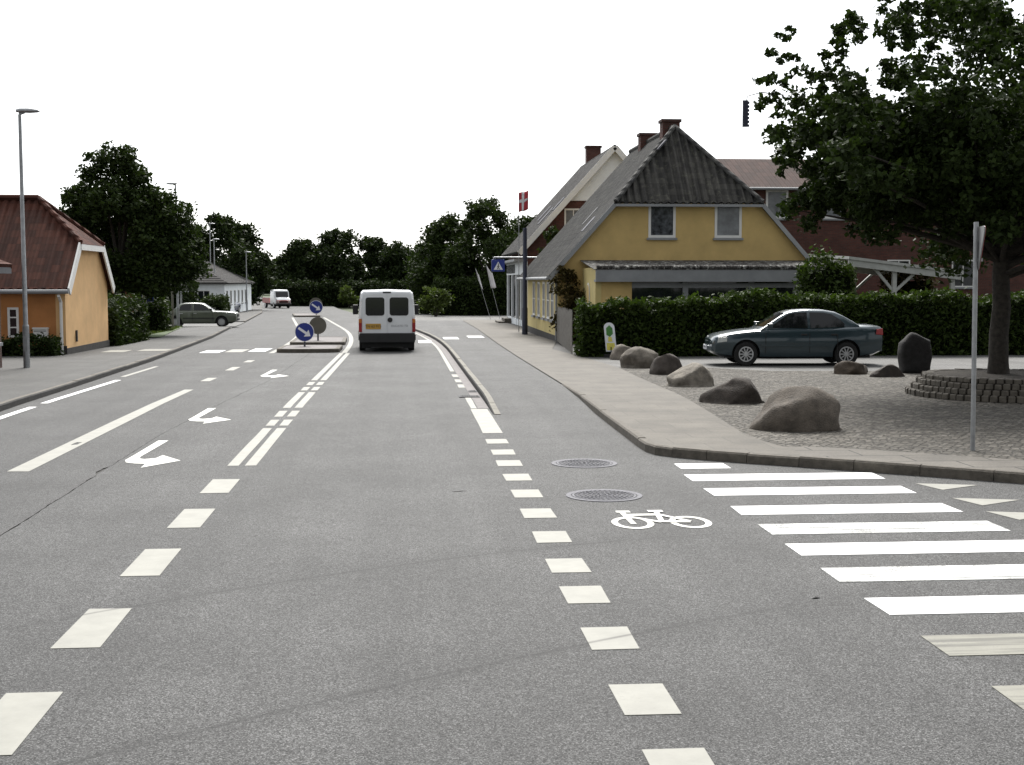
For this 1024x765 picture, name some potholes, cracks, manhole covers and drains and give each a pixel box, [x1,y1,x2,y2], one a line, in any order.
manhole cover [551,459,617,468]
manhole cover [566,489,643,502]
